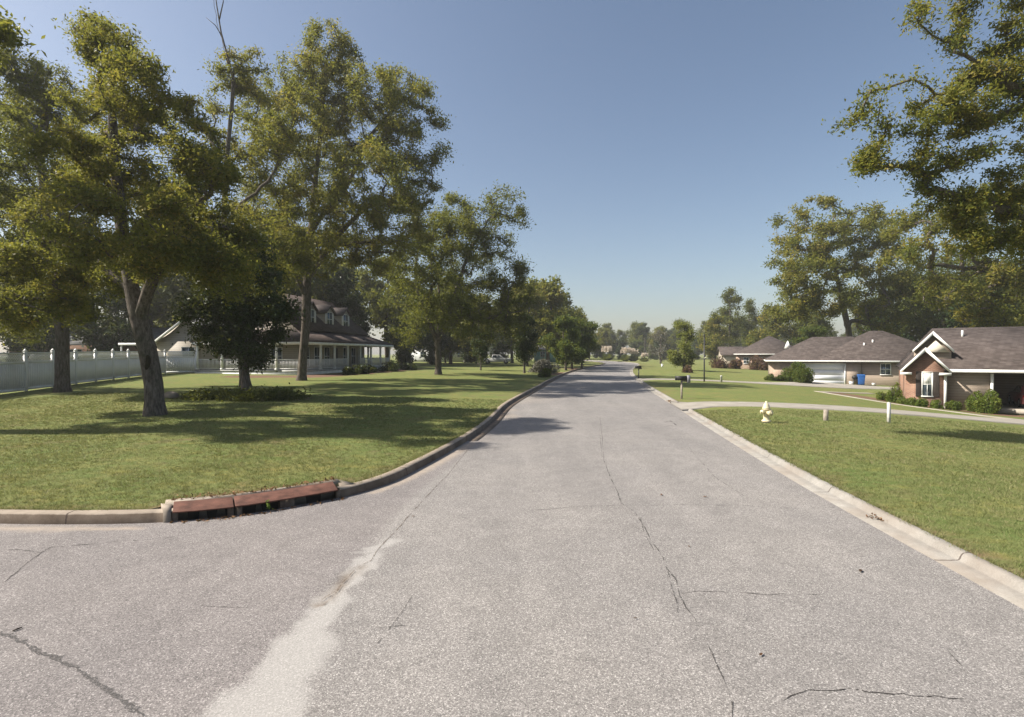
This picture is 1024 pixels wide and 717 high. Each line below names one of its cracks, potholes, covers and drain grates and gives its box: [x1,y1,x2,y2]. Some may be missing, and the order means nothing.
crack [537,420,829,713]
drain grate [161,479,355,523]
crack [0,631,145,716]
crack [781,688,968,702]
crack [6,534,195,581]
